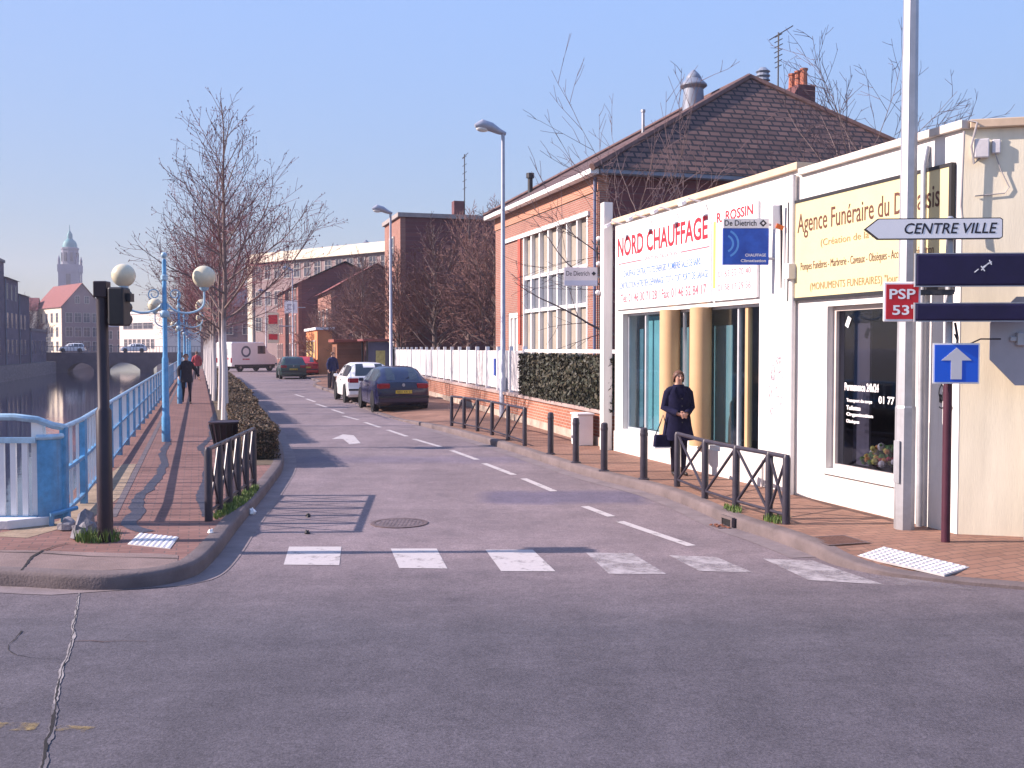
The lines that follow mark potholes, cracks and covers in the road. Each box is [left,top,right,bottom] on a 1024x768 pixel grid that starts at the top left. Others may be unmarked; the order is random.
drain grate [709,514,735,529]
manhole cover [815,535,871,545]
manhole cover [370,518,428,528]
